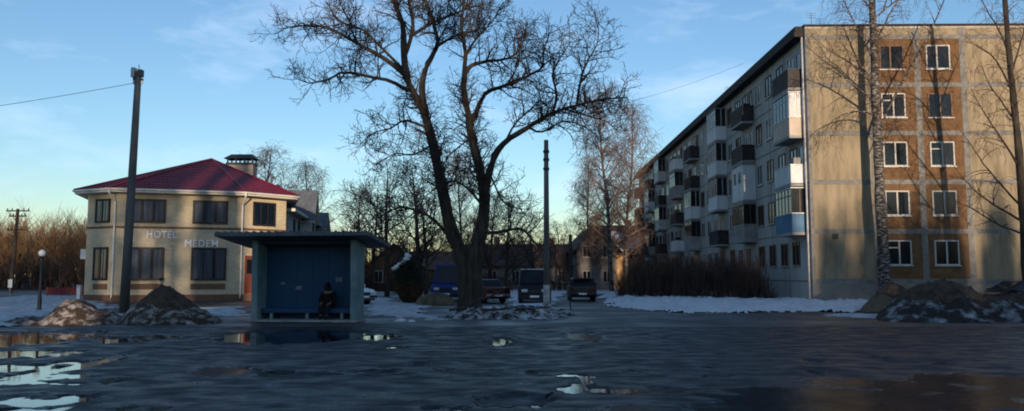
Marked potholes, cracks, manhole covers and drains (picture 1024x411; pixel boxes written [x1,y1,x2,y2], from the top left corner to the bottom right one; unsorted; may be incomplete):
pothole [482,335,520,347]
pothole [554,372,637,394]
